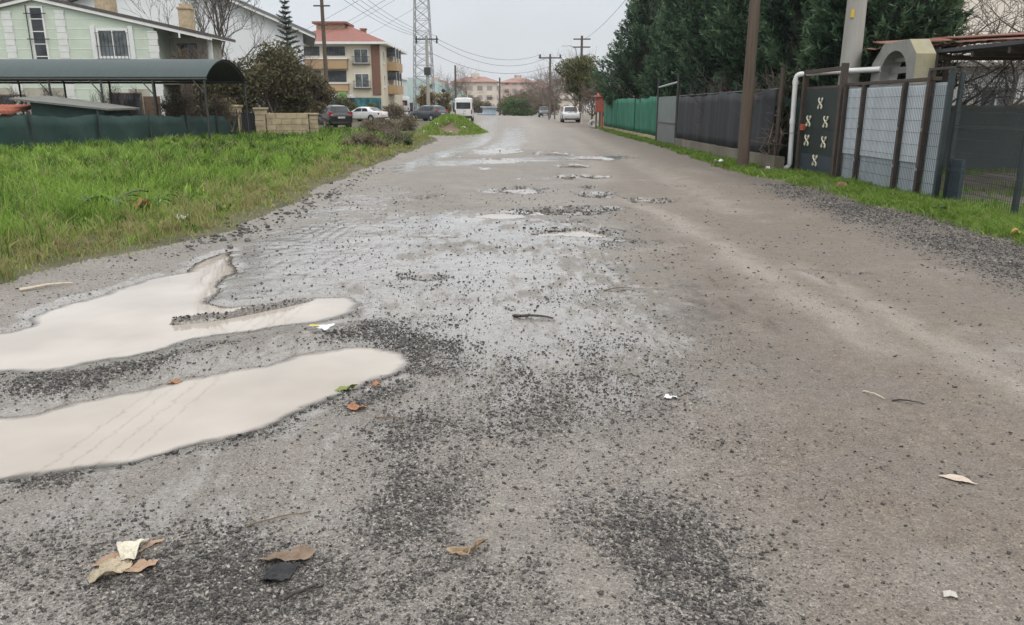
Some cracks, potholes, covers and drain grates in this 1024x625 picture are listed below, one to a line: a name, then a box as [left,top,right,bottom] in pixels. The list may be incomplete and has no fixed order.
pothole [519,205,624,216]
pothole [0,342,417,483]
pothole [467,211,544,219]
pothole [495,186,543,194]
pothole [0,249,368,374]
pothole [531,227,615,237]
